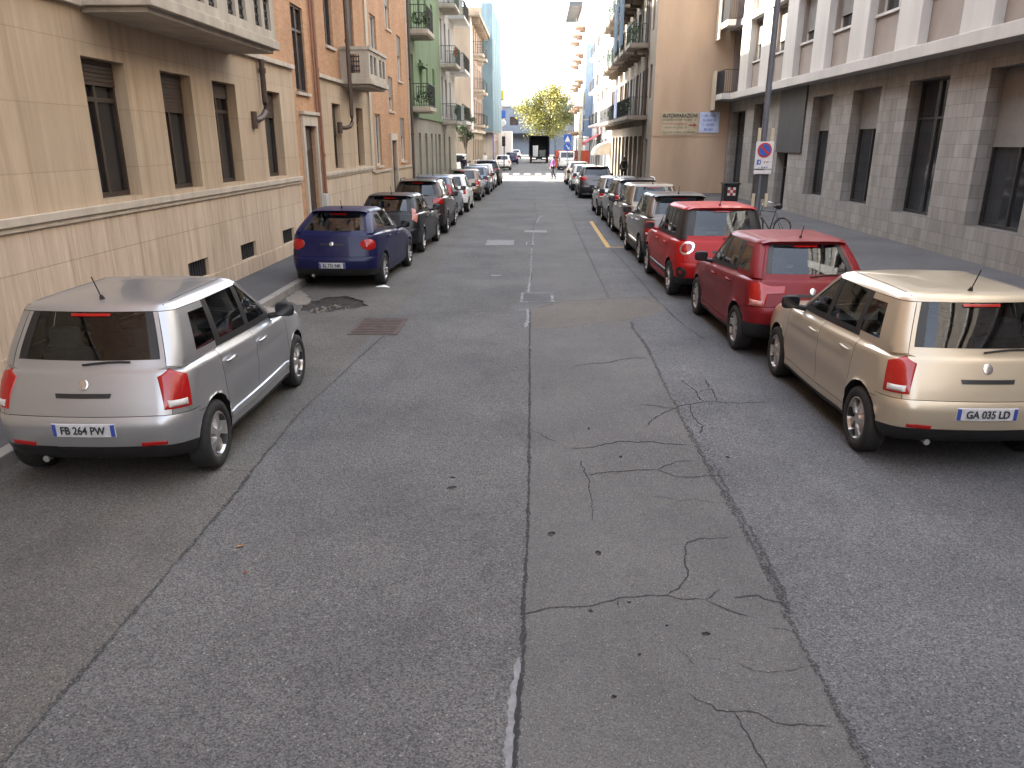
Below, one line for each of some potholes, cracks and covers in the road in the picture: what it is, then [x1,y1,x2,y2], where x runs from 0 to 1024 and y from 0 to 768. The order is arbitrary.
crack [526,211,870,767]
pothole [301,296,369,313]
manhole cover [520,293,554,303]
